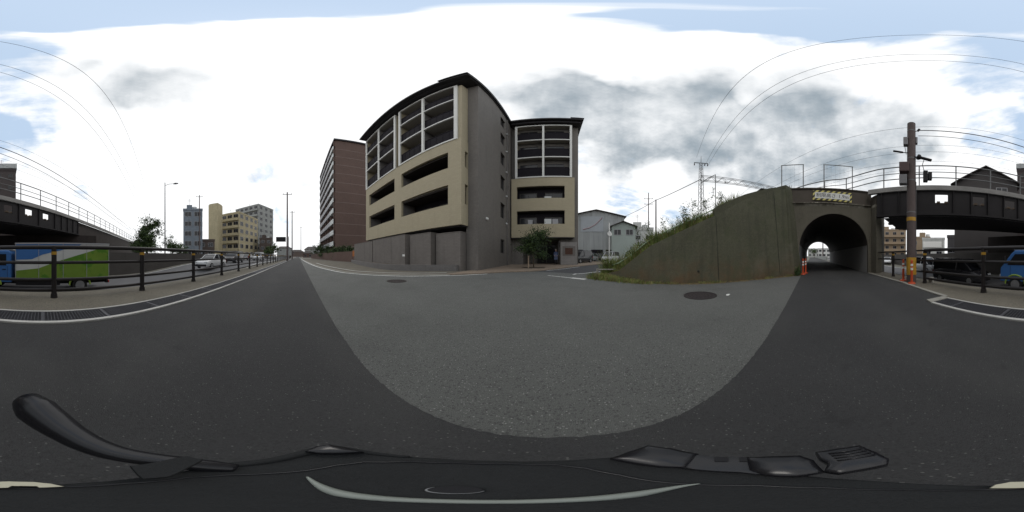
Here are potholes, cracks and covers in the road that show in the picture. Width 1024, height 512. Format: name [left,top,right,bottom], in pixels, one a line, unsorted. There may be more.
manhole cover [684,292,717,300]
